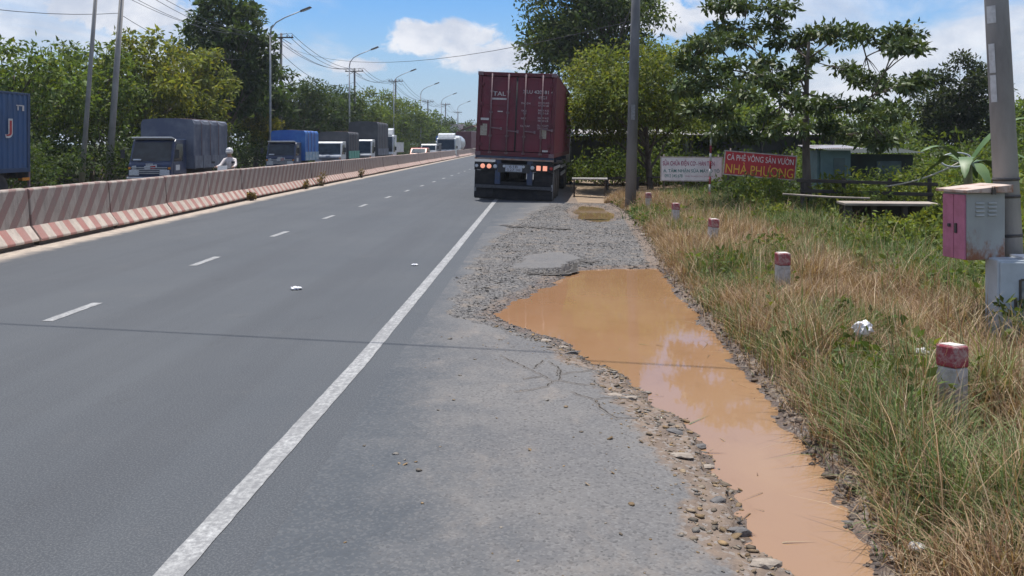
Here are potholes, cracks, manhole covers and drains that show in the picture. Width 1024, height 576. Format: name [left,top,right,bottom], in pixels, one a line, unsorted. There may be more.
pothole [570,205,618,222]
pothole [491,264,895,576]
crack [499,355,639,420]
